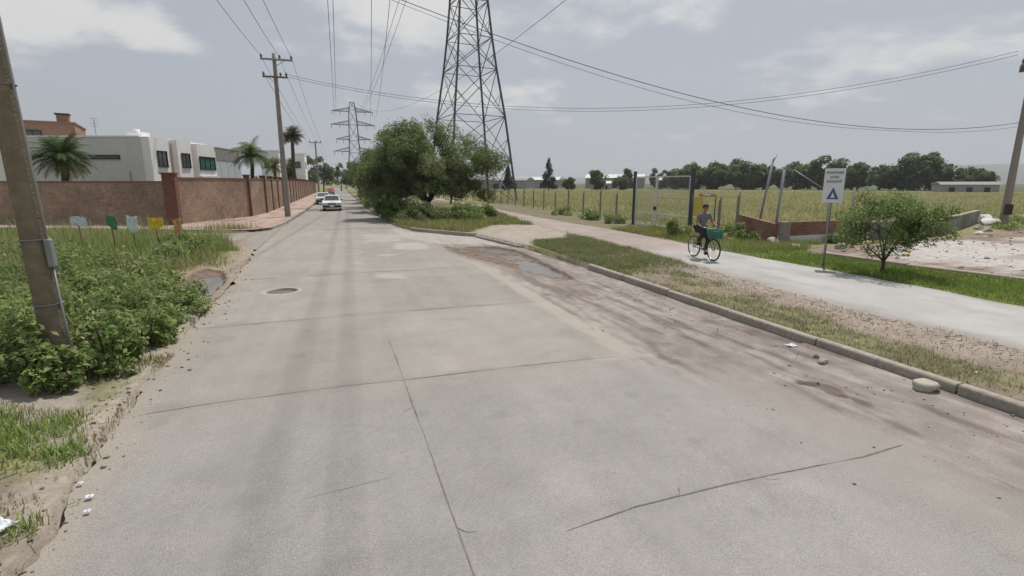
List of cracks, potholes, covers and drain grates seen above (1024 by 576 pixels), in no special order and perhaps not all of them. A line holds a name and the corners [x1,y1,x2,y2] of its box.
pothole [447,246,580,281]
manhole cover [259,287,302,296]
crack [567,445,901,531]
